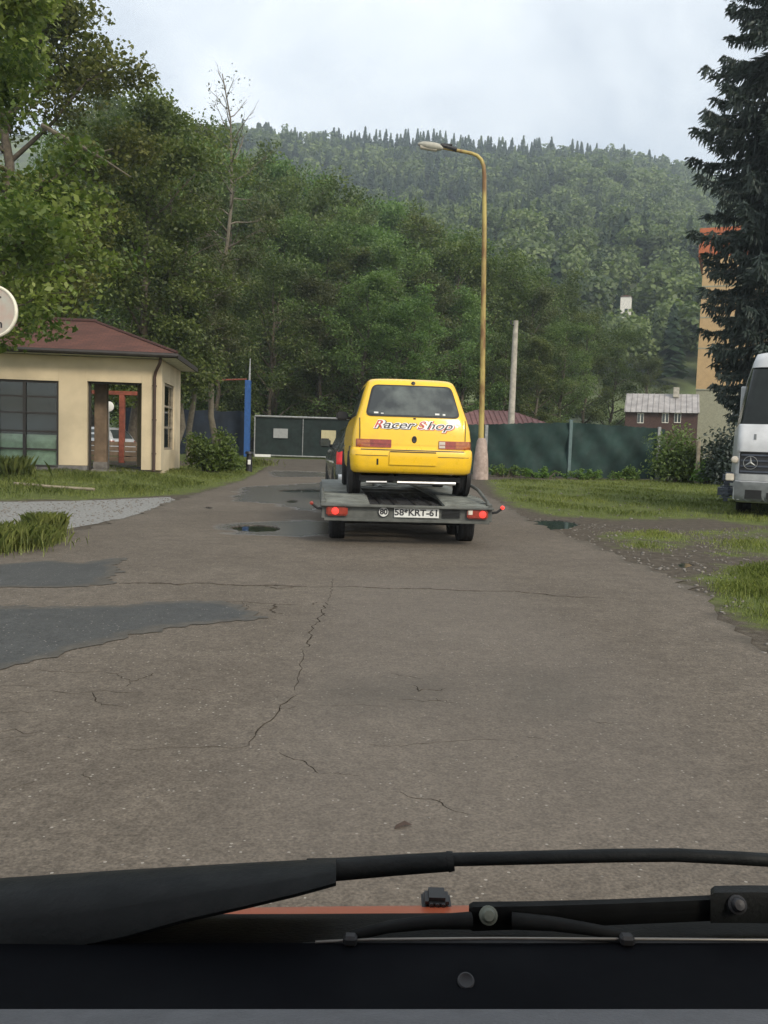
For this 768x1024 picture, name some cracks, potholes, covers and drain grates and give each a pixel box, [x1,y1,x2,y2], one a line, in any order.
crack [0,670,153,707]
crack [119,581,594,776]
